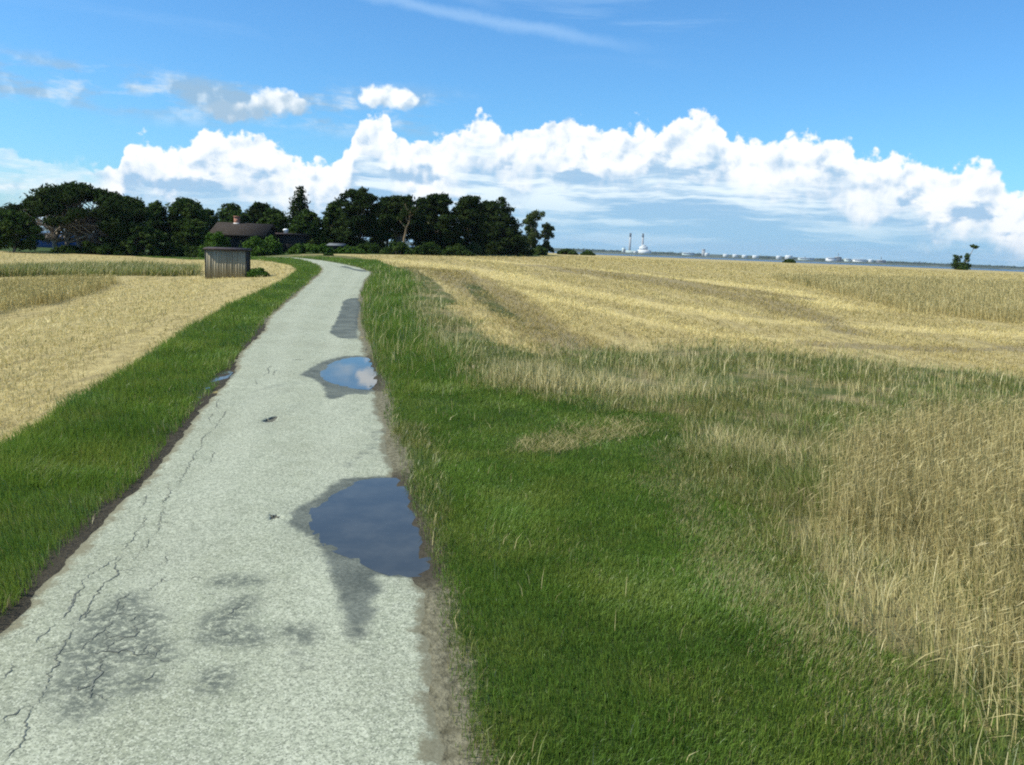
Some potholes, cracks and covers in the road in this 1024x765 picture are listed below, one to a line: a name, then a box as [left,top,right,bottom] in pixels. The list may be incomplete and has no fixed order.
pothole [255,415,285,424]
crack [1,402,226,758]
